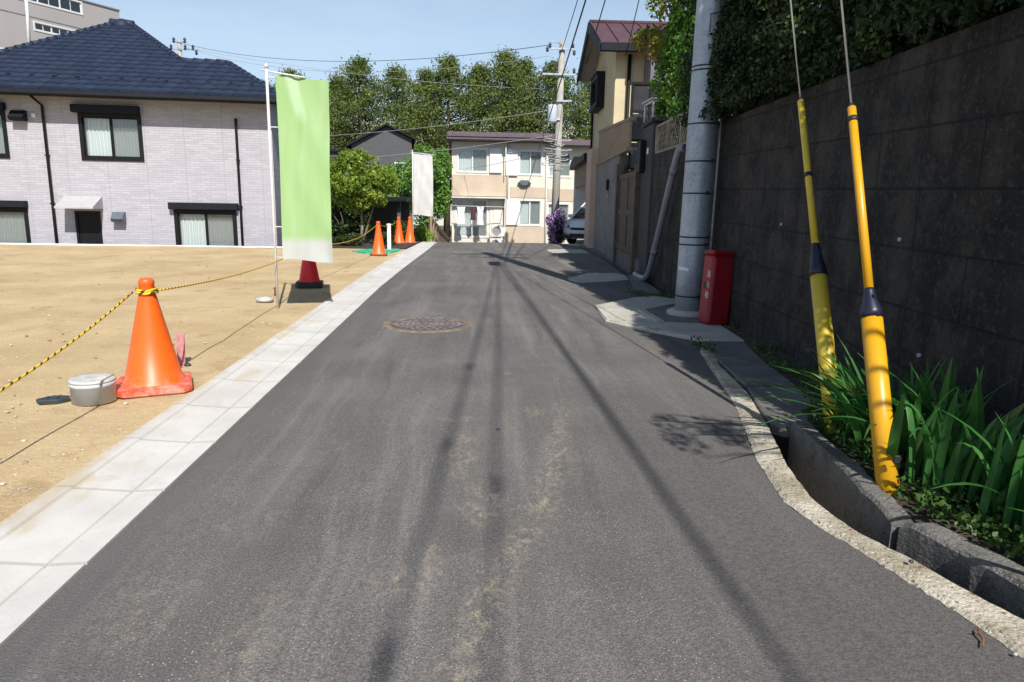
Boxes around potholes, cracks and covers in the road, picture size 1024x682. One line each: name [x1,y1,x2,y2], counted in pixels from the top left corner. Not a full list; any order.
manhole cover [382,317,473,333]
